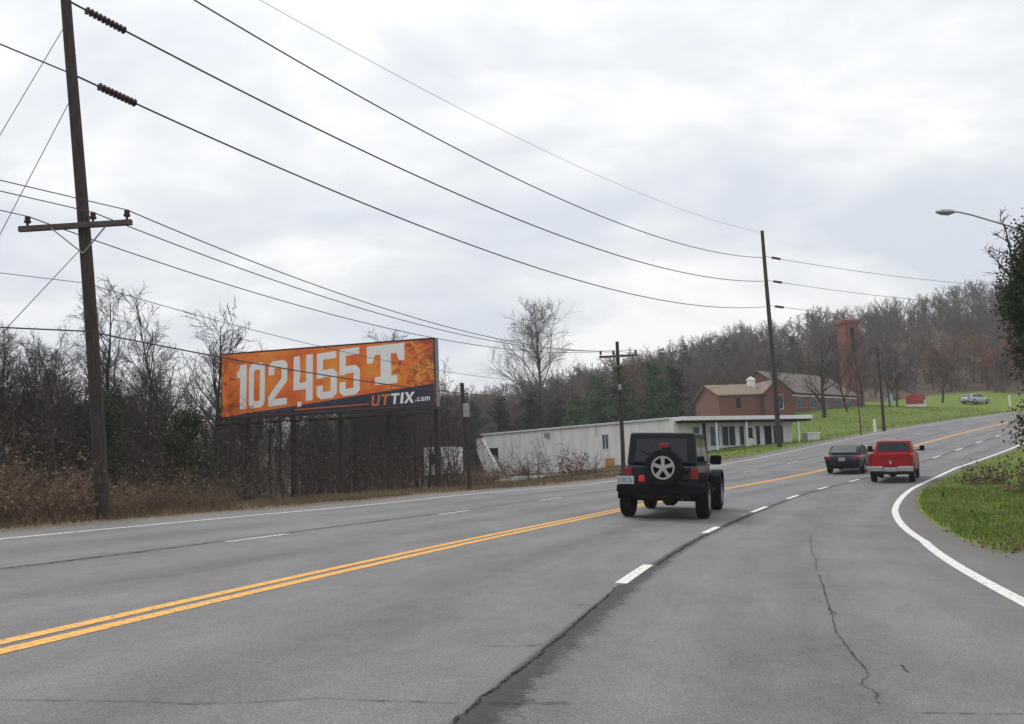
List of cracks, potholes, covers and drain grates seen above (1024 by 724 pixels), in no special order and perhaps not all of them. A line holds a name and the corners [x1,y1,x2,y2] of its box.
crack [810,538,881,704]
